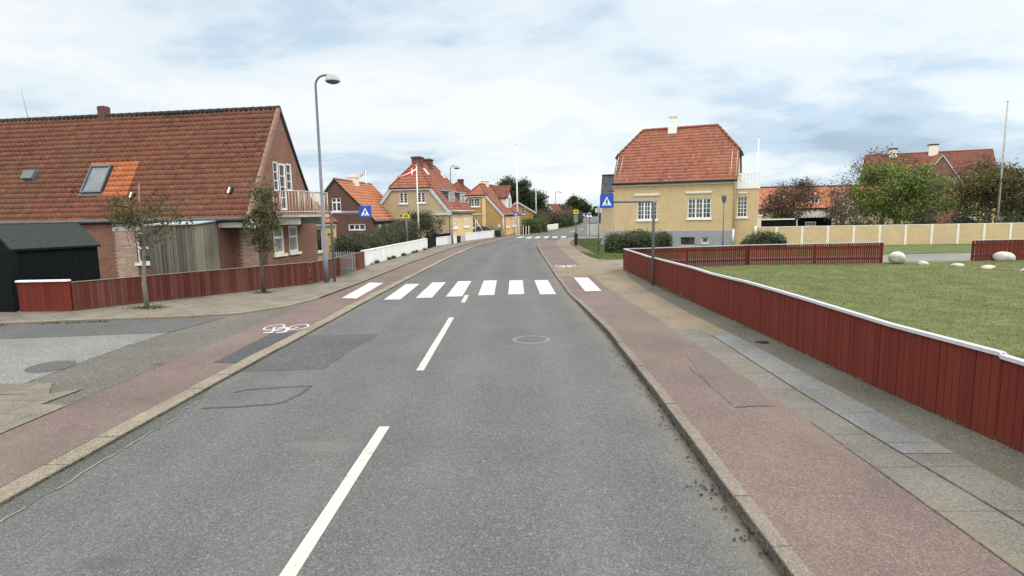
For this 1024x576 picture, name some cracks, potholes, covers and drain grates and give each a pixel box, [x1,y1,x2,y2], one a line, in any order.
manhole cover [512,336,550,344]
